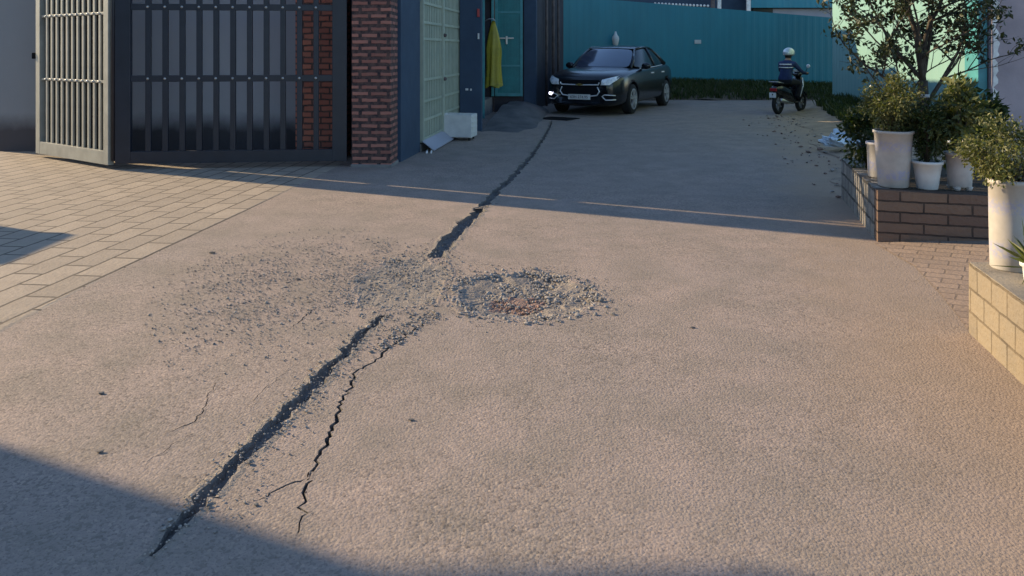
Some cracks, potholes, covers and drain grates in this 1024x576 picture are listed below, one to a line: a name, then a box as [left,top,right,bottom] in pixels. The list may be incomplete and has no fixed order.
crack [133,306,440,566]
pothole [451,269,613,325]
